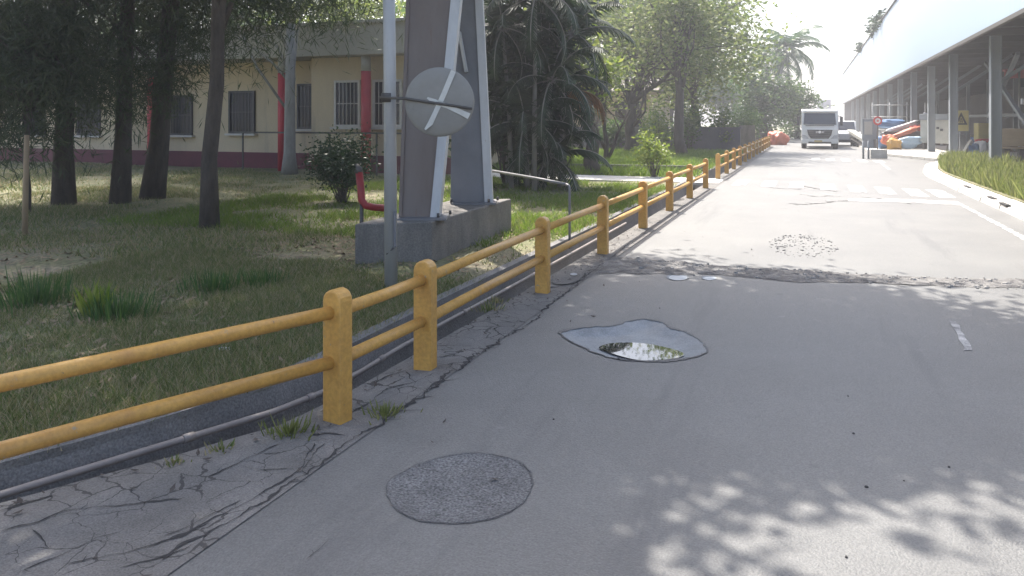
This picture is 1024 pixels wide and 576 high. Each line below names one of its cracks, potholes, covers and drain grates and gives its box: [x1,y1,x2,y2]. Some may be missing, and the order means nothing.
pothole [558,318,708,362]
crack [0,220,660,572]
